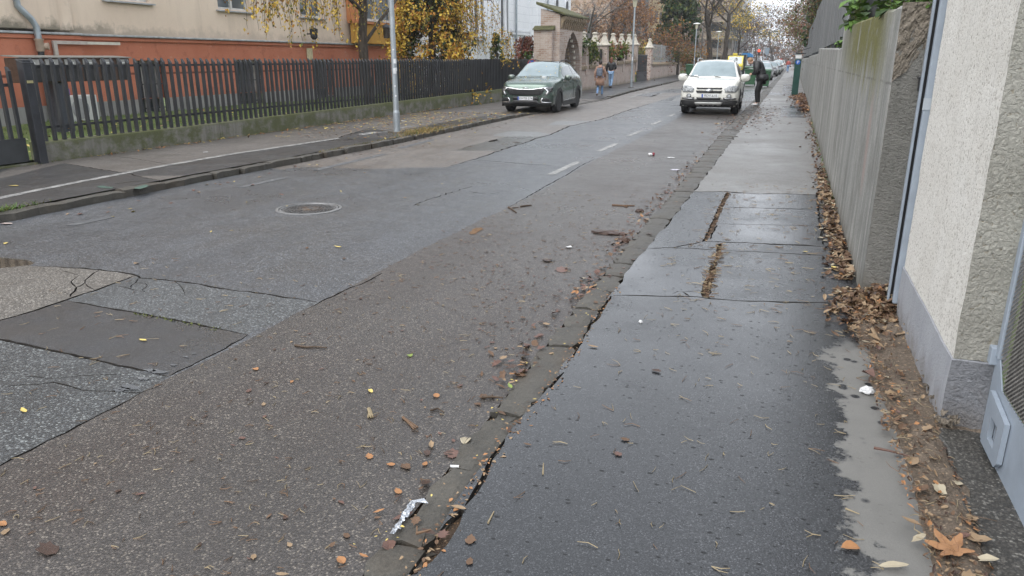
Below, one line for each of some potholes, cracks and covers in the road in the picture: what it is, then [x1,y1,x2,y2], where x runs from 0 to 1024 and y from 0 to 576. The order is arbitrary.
manhole cover [275,202,342,215]
crack [0,266,316,393]
